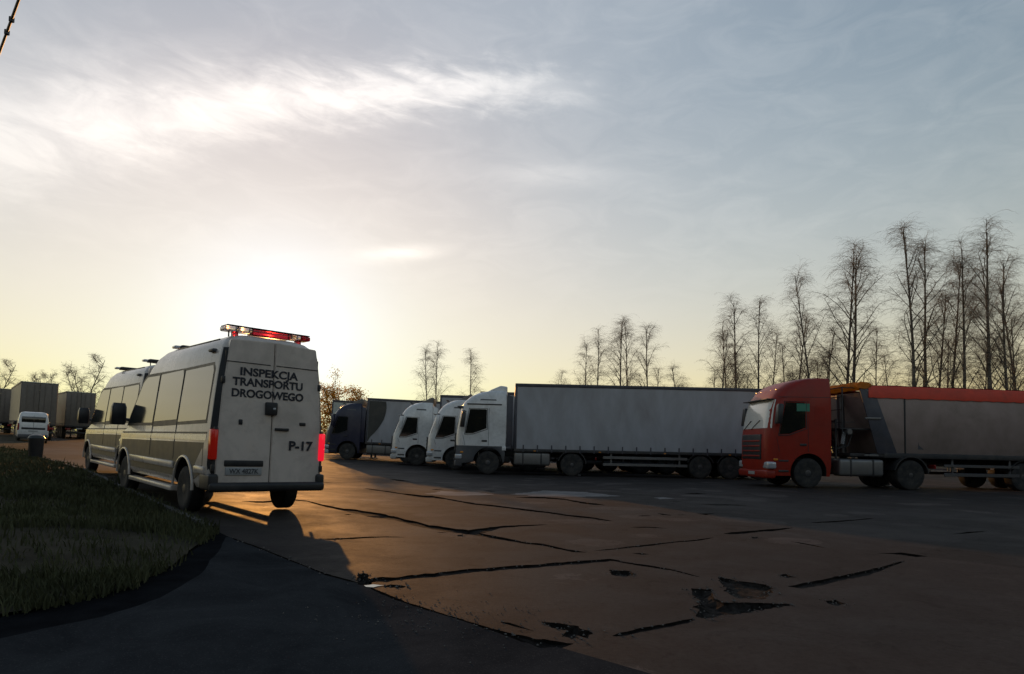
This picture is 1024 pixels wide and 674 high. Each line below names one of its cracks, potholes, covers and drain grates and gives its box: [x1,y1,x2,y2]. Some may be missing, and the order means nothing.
crack [232,479,925,648]
pothole [718,577,773,603]
pothole [541,622,593,644]
